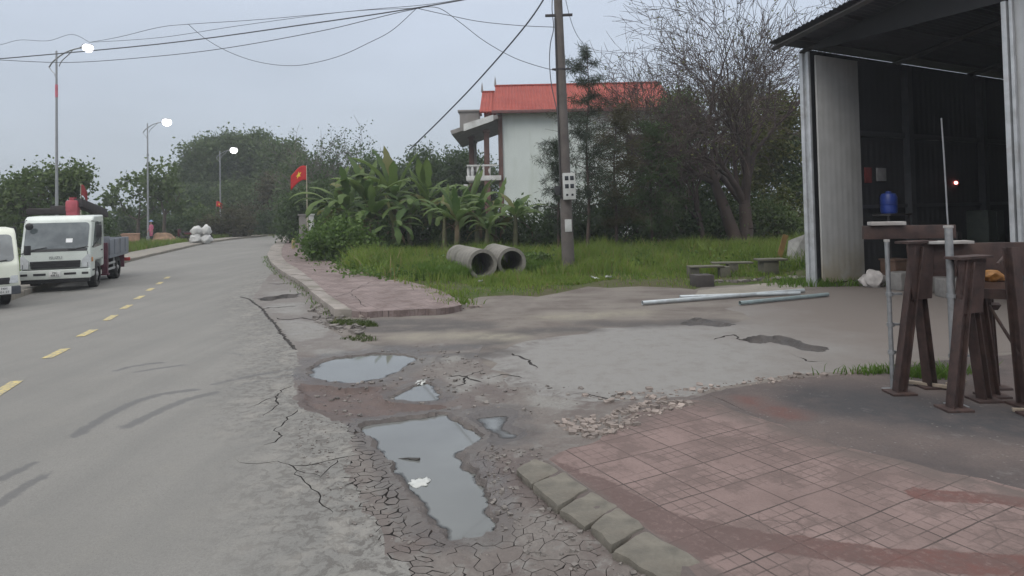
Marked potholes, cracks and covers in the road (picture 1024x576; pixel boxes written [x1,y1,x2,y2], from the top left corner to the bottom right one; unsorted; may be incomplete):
crack [450,354,538,386]
crack [241,283,313,350]
pothole [305,352,418,383]
crack [254,386,298,444]
pothole [357,411,499,541]
crack [240,424,446,576]
pothole [465,408,528,446]
pothole [259,293,301,301]
crack [447,449,607,576]
